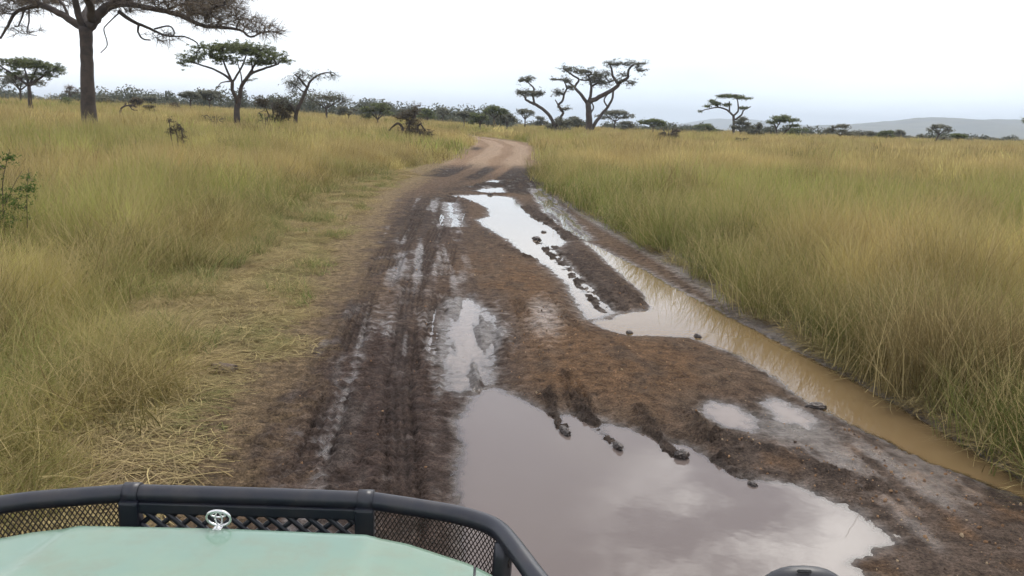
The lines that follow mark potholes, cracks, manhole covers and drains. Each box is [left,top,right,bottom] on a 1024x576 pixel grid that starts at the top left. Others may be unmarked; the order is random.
pothole [434,381,924,576]
pothole [425,292,514,400]
